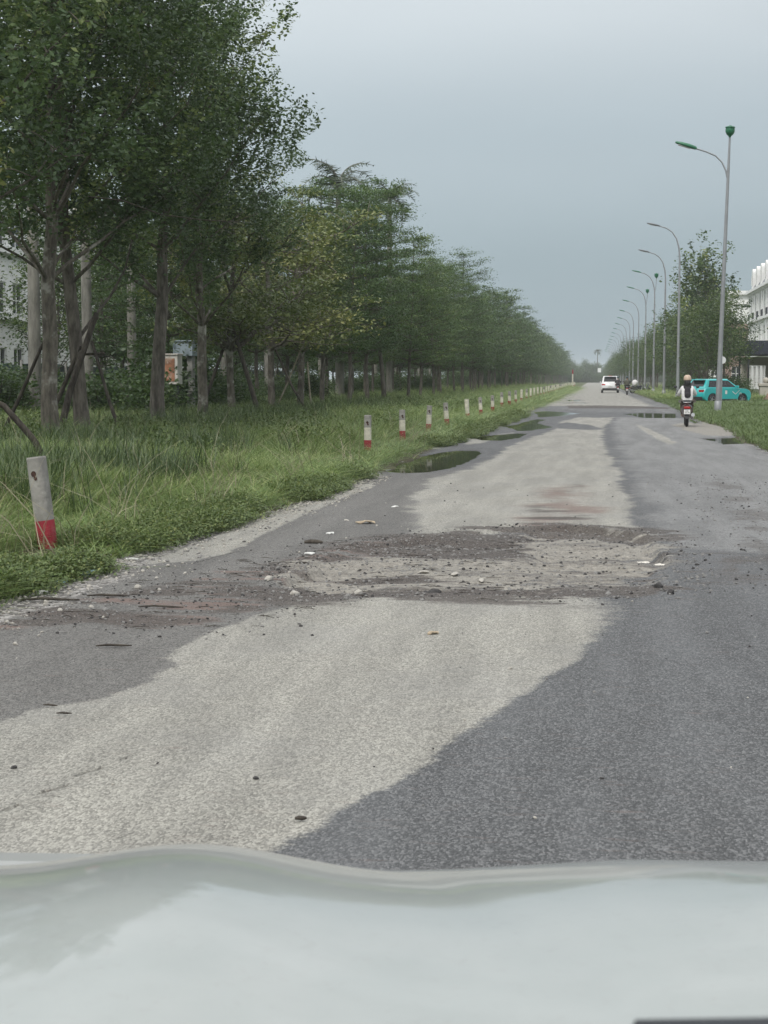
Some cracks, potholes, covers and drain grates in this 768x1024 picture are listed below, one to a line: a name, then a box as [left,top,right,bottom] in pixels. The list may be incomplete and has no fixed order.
pothole [473,432,534,441]
pothole [246,524,681,599]
pothole [698,436,744,445]
pothole [379,449,494,473]
